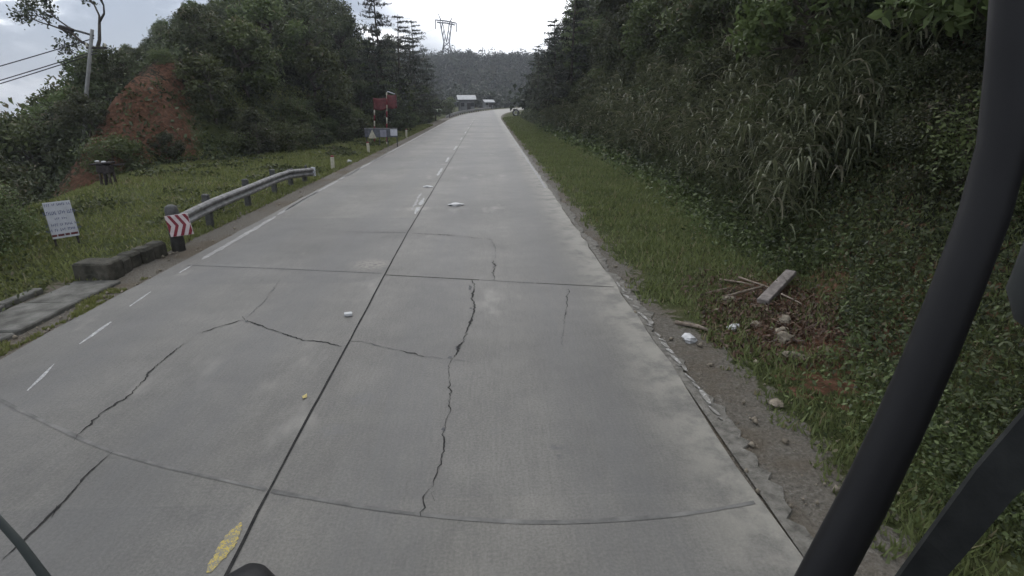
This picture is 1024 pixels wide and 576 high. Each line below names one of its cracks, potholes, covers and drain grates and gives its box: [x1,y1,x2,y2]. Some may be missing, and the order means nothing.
crack [351,233,496,516]
crack [3,451,113,559]
crack [77,287,339,435]
